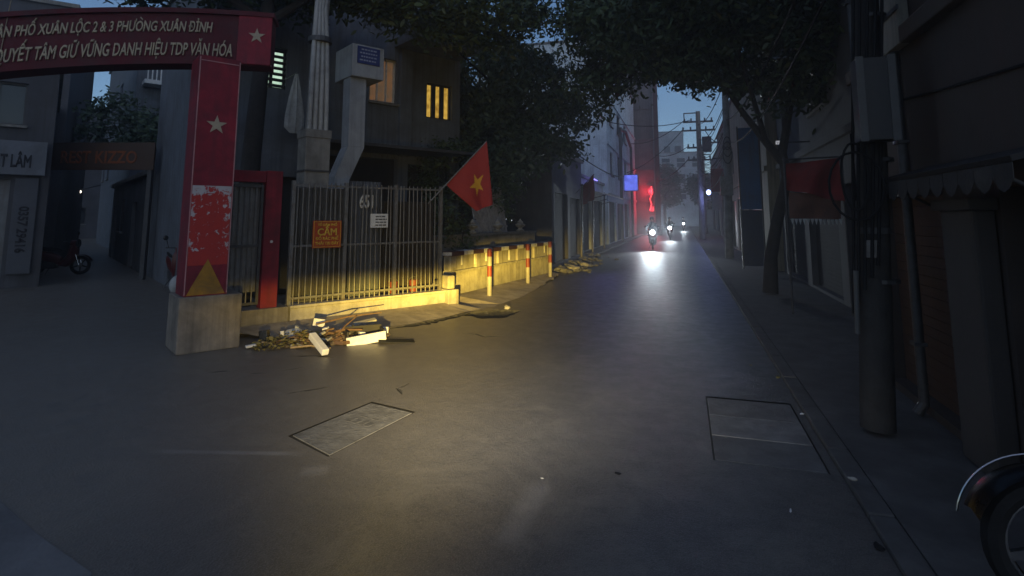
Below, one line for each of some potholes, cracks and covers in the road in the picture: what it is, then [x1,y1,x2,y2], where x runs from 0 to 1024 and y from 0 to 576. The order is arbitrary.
crack [390,313,496,337]
manhole cover [289,403,415,457]
